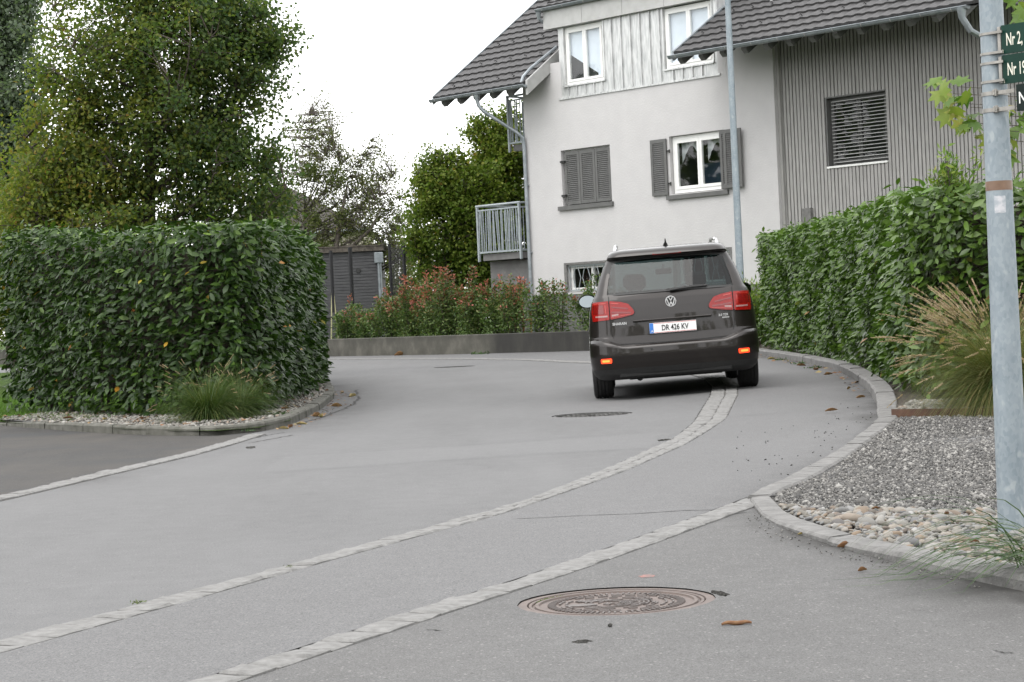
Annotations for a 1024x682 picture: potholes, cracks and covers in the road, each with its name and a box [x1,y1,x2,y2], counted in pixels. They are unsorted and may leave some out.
manhole cover [517,587,720,616]
